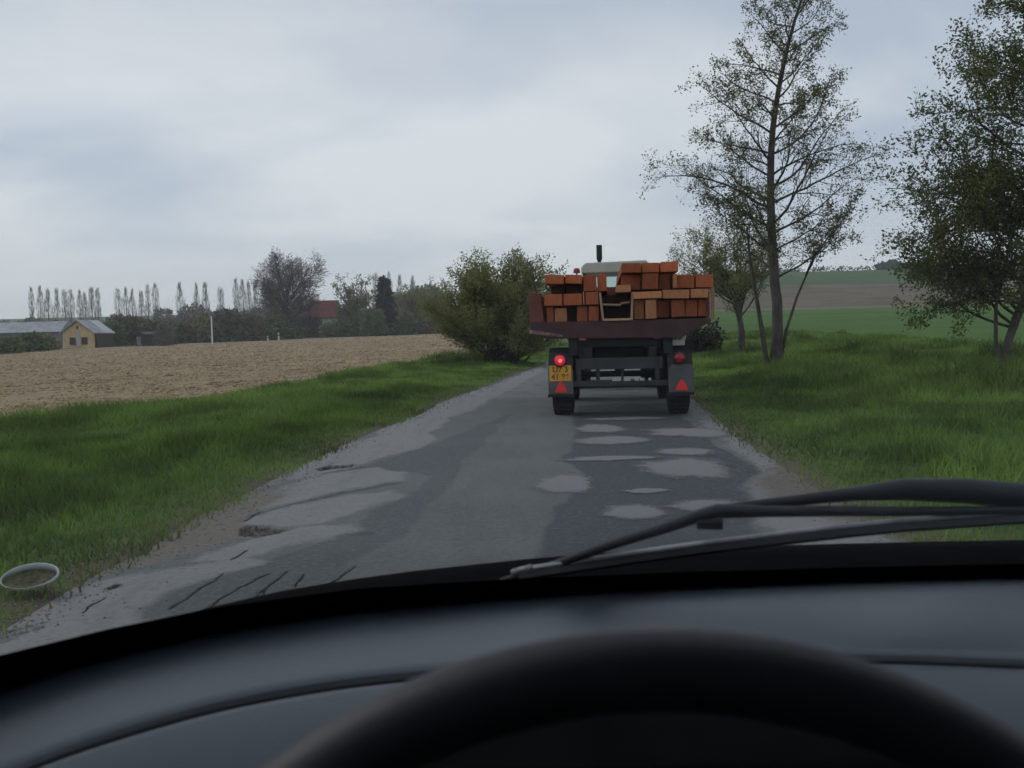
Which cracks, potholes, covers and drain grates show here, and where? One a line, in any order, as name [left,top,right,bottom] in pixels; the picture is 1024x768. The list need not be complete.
pothole [239,526,283,538]
crack [169,550,304,609]
